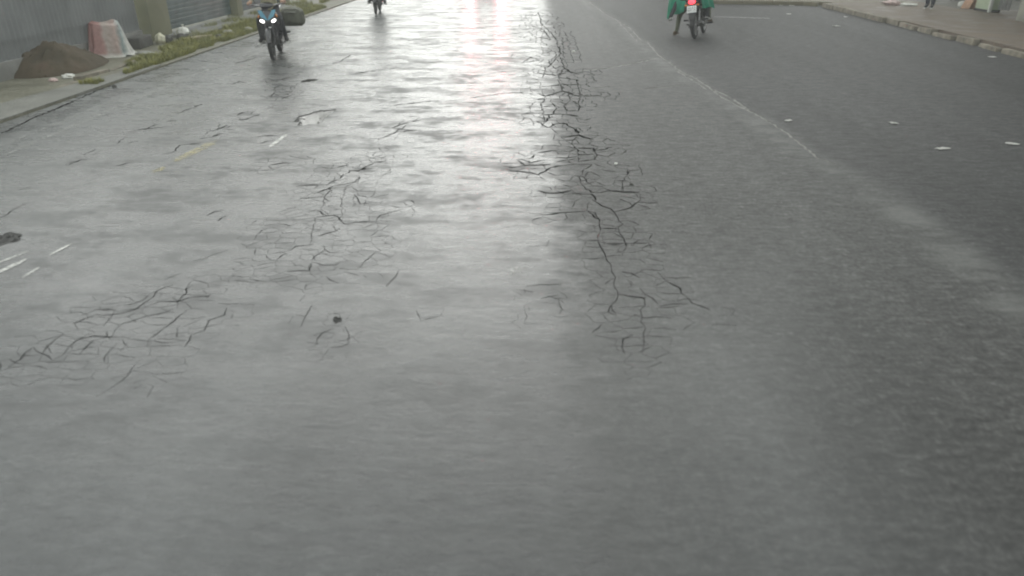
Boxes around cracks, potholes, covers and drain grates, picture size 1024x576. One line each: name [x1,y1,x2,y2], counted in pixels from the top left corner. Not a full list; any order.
crack [119,104,202,143]
crack [378,101,434,140]
crack [232,147,416,361]
crack [432,2,836,377]
crack [0,272,258,386]
crack [153,76,304,171]
pothole [293,109,336,126]
pothole [0,232,22,246]
